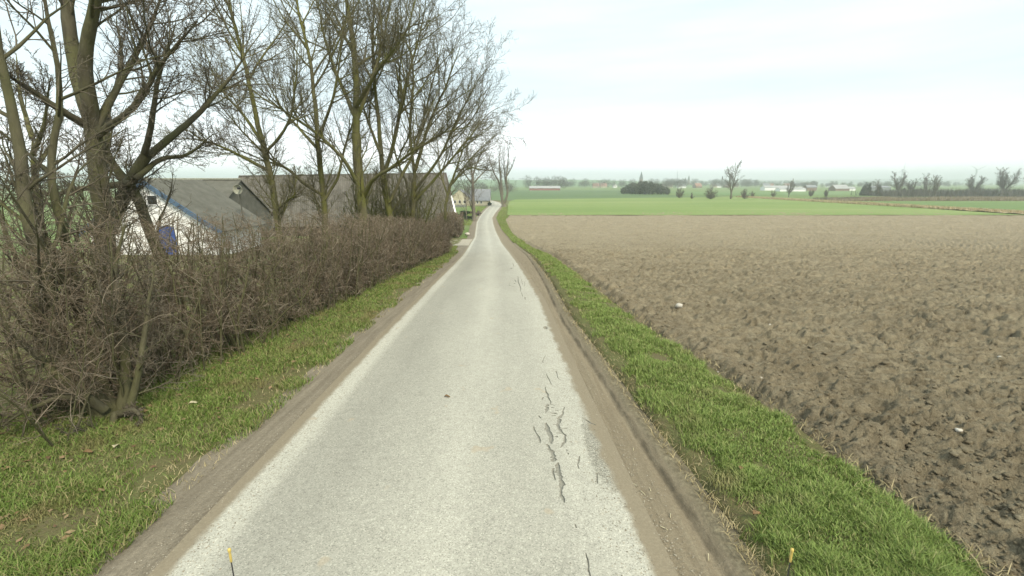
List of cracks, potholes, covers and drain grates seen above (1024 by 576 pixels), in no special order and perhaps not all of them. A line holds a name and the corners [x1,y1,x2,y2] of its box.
crack [533,357,598,503]
